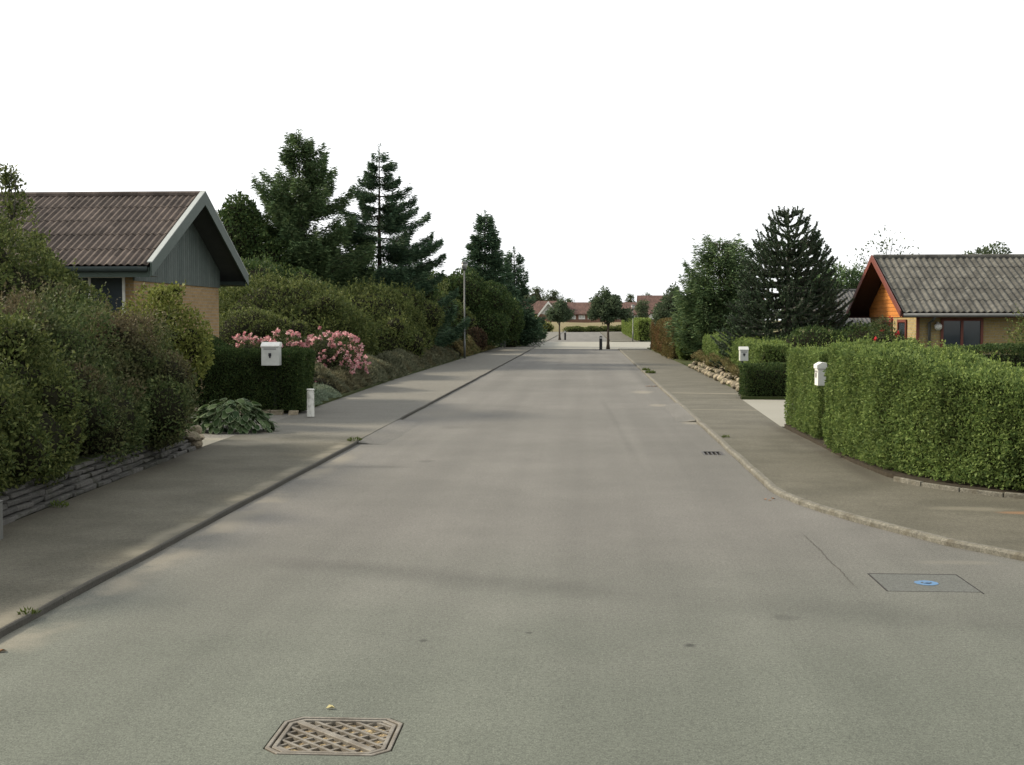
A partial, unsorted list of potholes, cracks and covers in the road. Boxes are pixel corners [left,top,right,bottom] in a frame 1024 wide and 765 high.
manhole cover [867,573,984,594]
crack [804,535,855,586]
